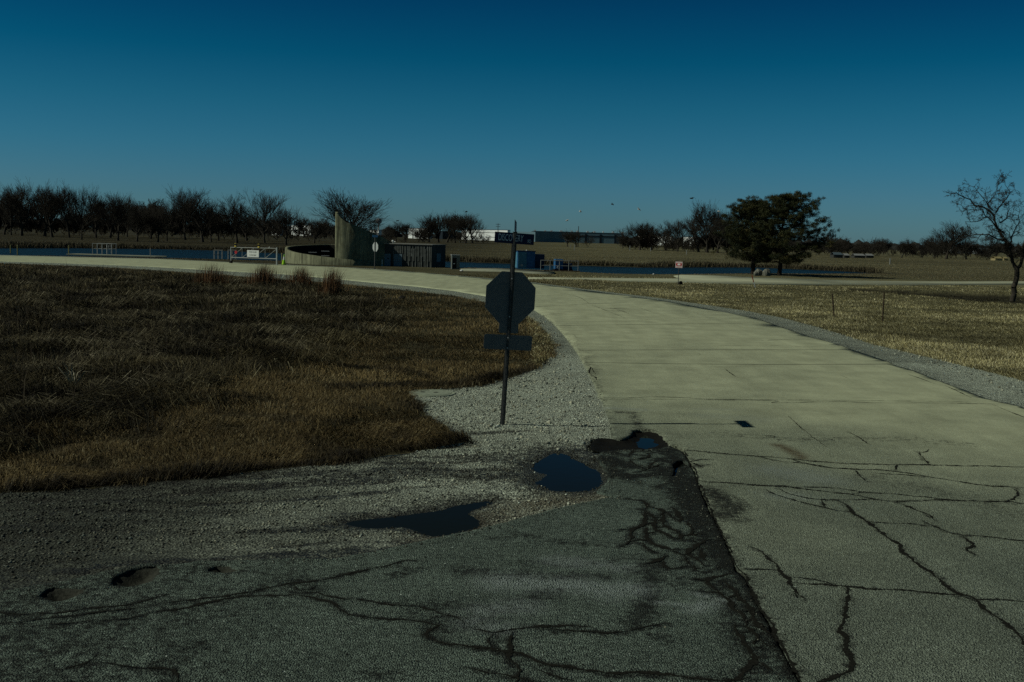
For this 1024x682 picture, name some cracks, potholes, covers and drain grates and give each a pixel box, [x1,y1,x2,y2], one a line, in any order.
crack [0,594,168,624]
pothole [112,567,160,587]
pothole [336,498,502,539]
pothole [524,450,607,493]
pothole [40,588,85,601]
crack [159,449,1024,682]
pothole [589,431,672,452]
